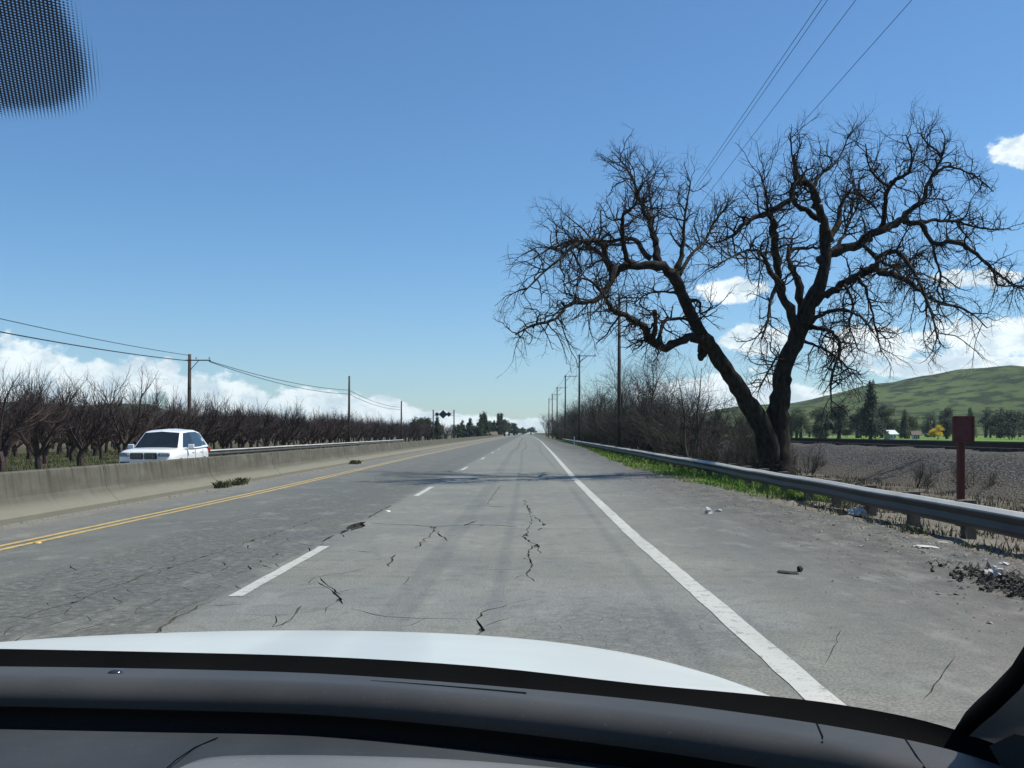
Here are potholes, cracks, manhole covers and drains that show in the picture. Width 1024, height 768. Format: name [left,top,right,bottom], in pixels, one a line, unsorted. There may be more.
crack [924,656,956,699]
crack [355,599,530,635]
crack [242,550,364,627]
pothole [322,522,365,542]
crack [376,486,545,582]
crack [0,518,344,641]
